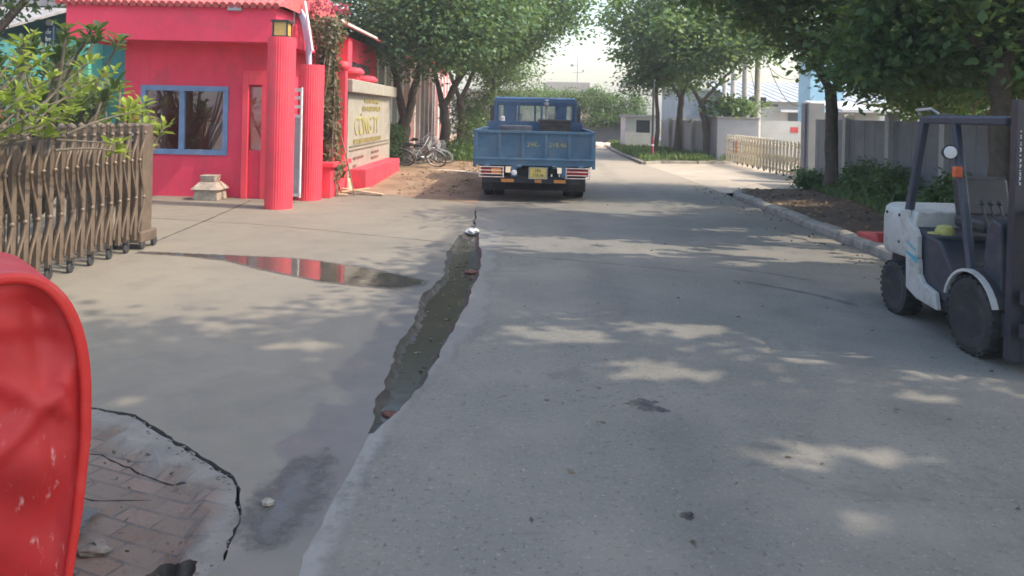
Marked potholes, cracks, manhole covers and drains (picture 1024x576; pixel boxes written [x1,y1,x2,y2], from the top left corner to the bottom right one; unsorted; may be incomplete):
pothole [145,559,198,576]
pothole [368,226,482,434]
